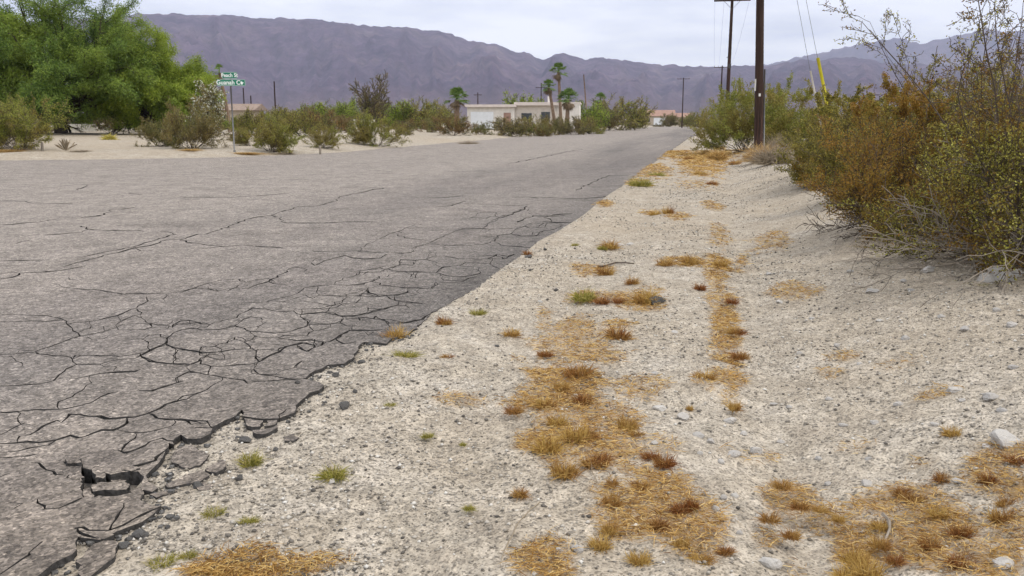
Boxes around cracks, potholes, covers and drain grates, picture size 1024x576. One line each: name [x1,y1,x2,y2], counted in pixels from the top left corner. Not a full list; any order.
crack [0,204,568,574]
crack [500,196,606,223]
pothole [64,462,144,496]
crack [0,185,384,301]
